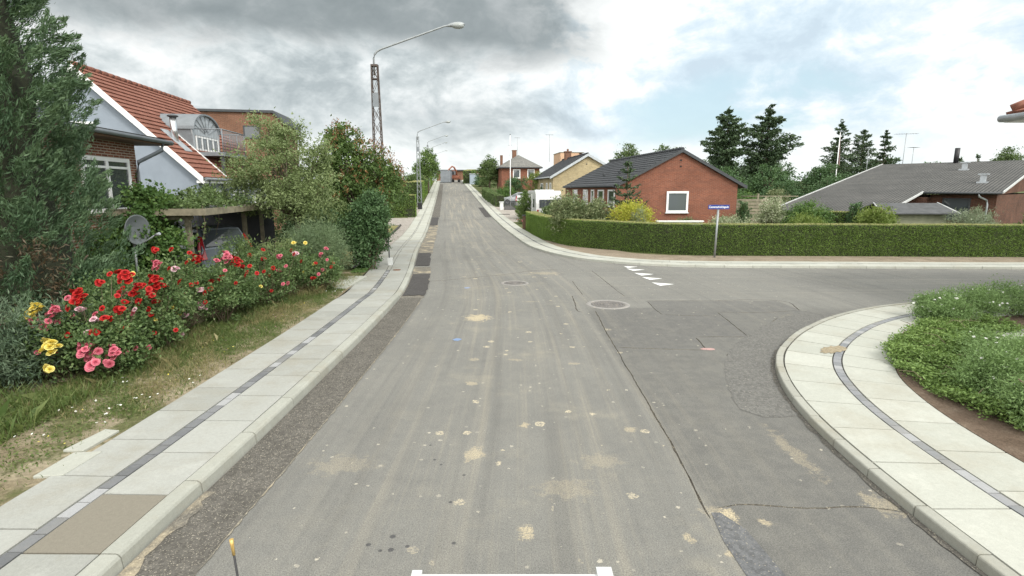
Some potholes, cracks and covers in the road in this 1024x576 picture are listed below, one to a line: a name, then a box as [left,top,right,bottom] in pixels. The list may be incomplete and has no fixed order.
manhole cover [586,300,630,309]
